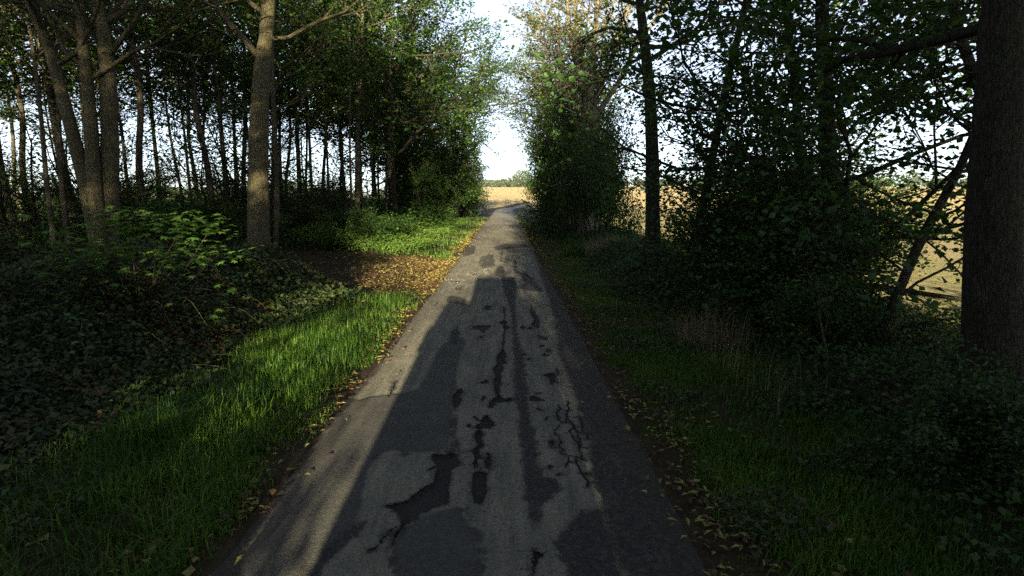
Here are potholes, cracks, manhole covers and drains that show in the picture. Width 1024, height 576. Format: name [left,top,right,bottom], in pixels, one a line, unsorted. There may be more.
crack [545,401,592,487]
pothole [385,453,460,544]
pothole [453,388,463,408]
pothole [476,415,494,430]
pothole [471,471,488,505]
pothole [472,430,486,468]
crack [368,525,397,551]
pothole [530,305,540,329]
